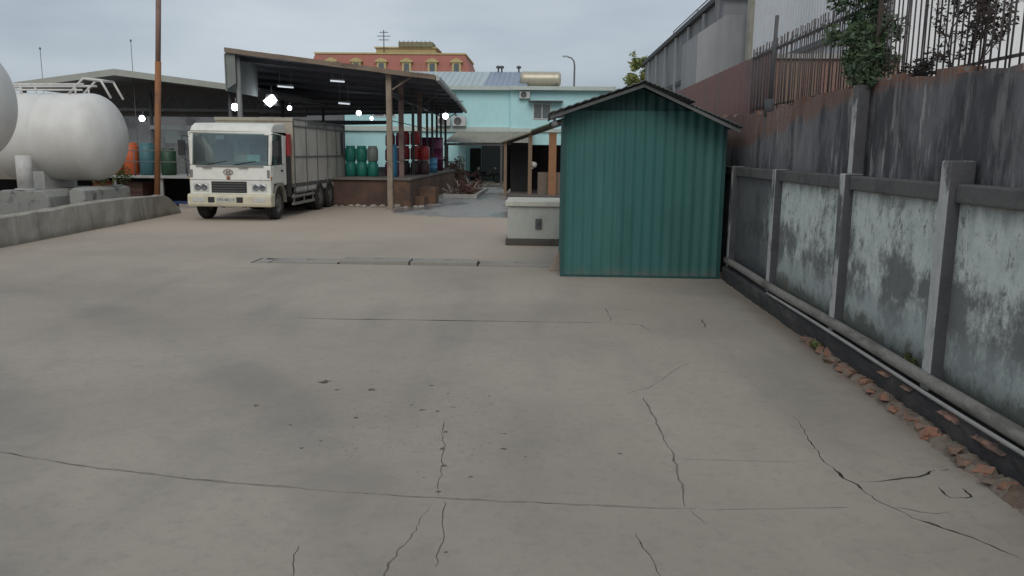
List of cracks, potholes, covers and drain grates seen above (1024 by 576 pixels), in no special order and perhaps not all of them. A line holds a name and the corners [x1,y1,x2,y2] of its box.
crack [627,363,706,524]
crack [383,422,446,576]
crack [799,422,1019,558]
